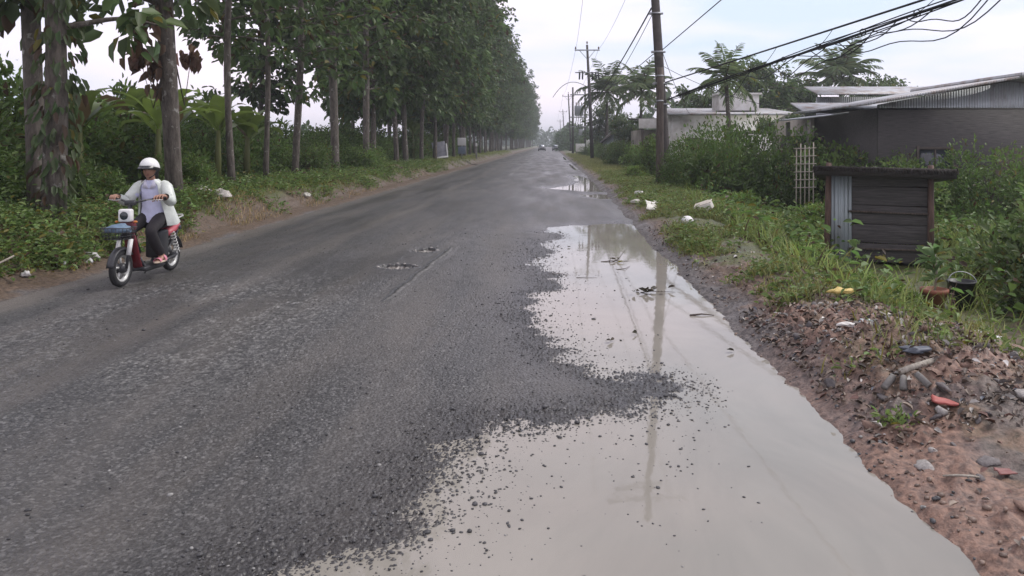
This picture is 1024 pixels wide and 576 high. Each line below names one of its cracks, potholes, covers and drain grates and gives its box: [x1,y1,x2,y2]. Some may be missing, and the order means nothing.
pothole [373,262,421,270]
crack [379,246,452,302]
